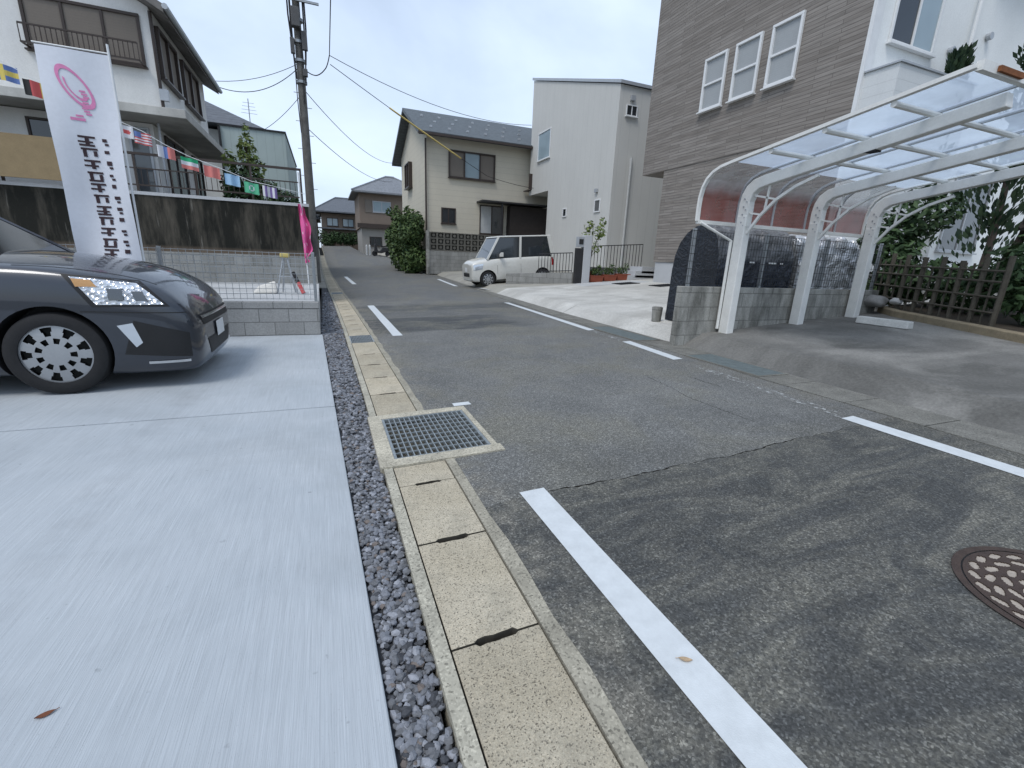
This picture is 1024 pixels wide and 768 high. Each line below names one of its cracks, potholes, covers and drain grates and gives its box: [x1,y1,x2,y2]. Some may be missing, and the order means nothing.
manhole cover [951,546,1024,628]
drain grate [382,410,490,459]
drain grate [349,335,375,344]
crack [548,424,858,492]
